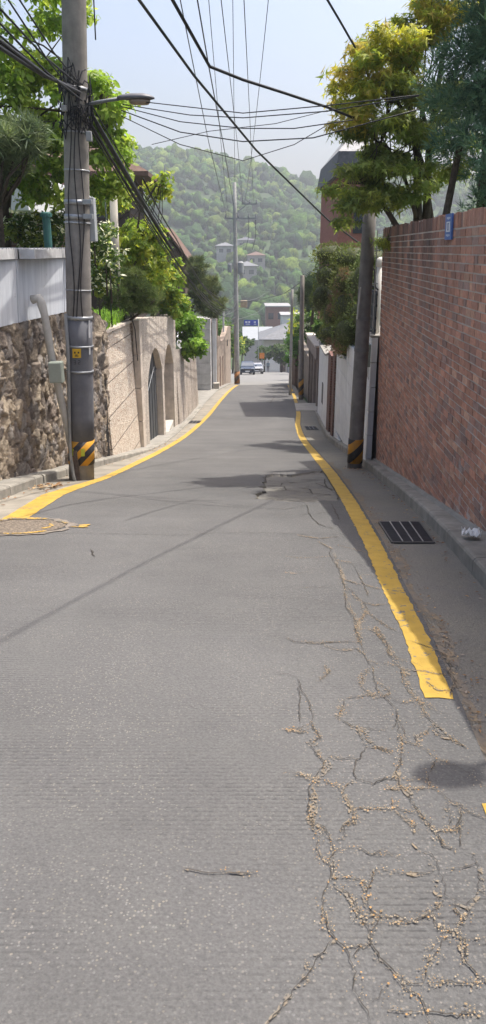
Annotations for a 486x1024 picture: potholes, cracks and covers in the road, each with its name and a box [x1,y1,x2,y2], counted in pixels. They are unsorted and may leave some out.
crack [264,535,486,1024]
crack [183,867,258,877]
manhole cover [0,517,90,536]
drain grate [378,521,435,543]
pothole [255,470,339,502]
